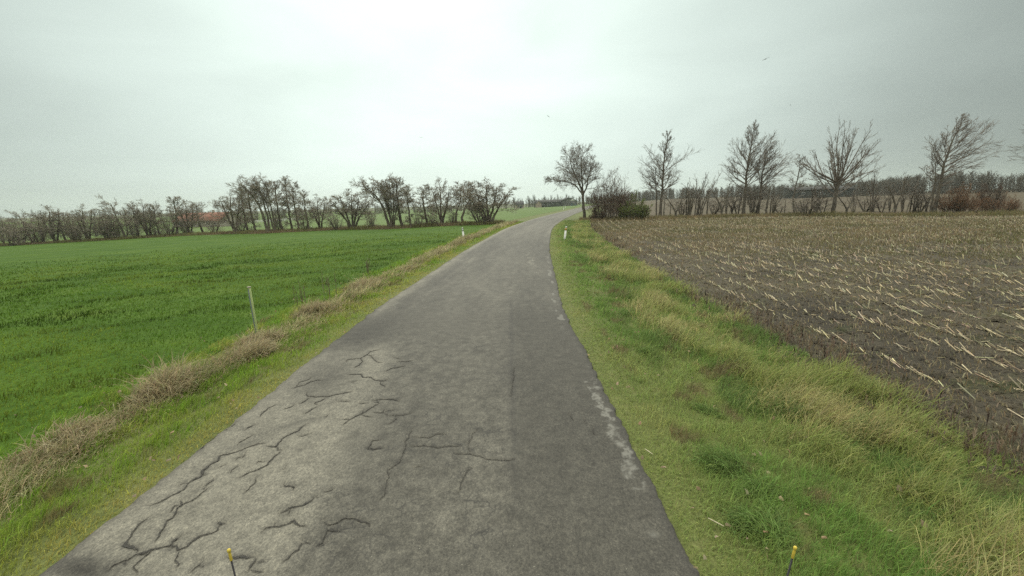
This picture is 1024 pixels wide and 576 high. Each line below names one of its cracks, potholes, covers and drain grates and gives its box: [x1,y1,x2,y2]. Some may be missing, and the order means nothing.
crack [109,350,511,572]
